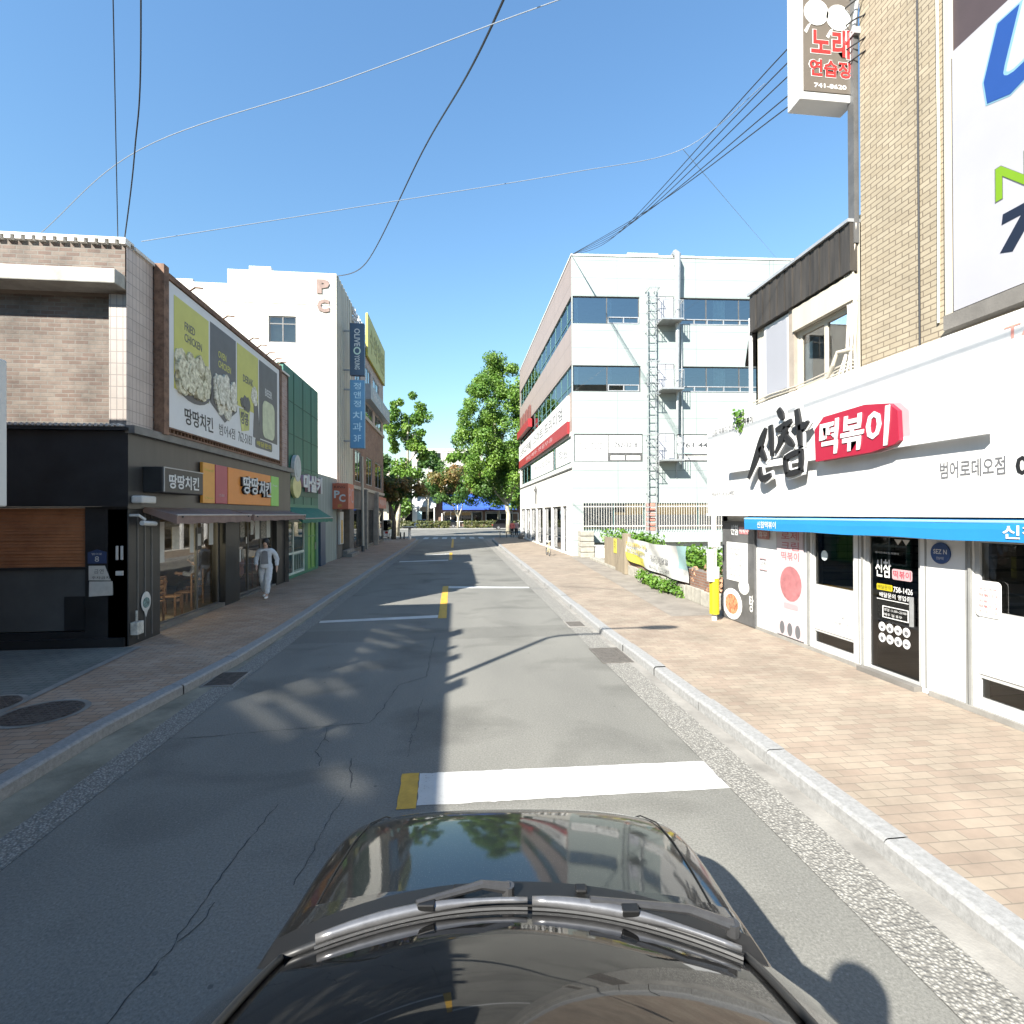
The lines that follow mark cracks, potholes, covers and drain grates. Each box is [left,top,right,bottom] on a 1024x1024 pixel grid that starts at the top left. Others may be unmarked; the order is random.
drain grate [199,671,252,687]
manhole cover [0,694,28,709]
manhole cover [0,699,92,729]
crack [107,804,278,1024]
crack [293,758,353,885]
